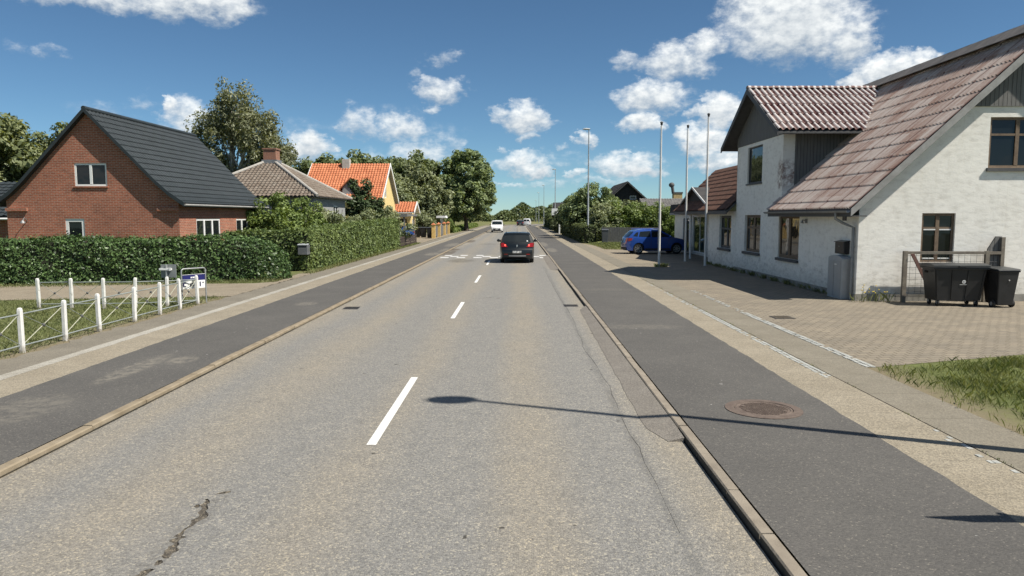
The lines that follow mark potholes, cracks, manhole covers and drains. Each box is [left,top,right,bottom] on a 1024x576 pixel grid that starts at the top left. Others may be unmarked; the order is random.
manhole cover [725,399,803,419]
crack [135,491,231,576]
